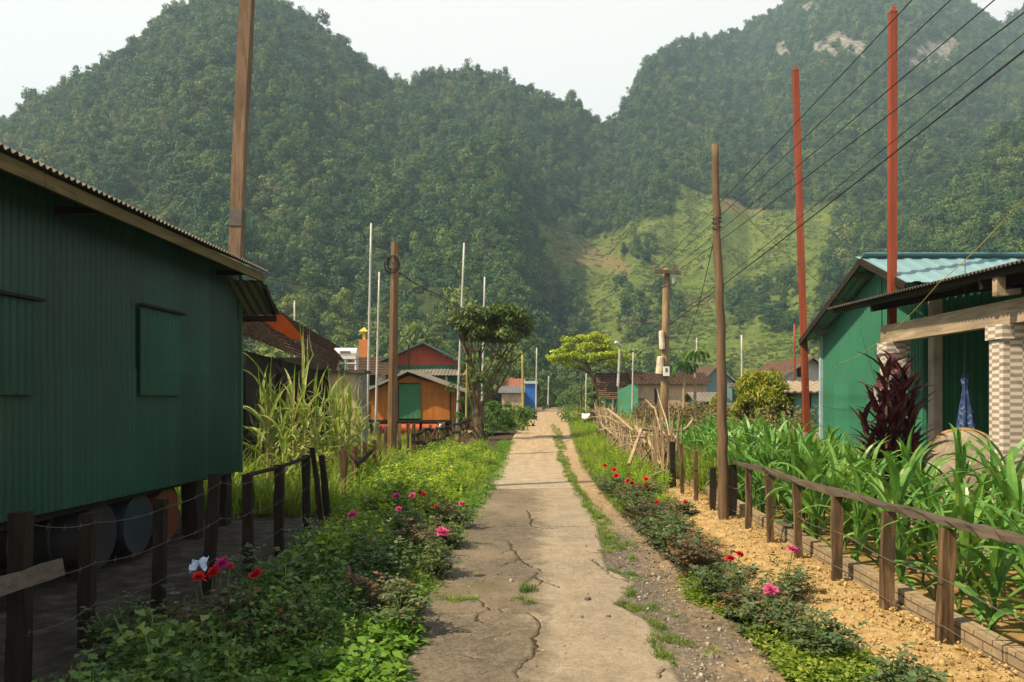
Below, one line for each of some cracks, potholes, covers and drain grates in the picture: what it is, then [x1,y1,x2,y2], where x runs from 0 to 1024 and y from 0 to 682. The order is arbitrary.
crack [442,600,541,678]
crack [502,541,559,587]
